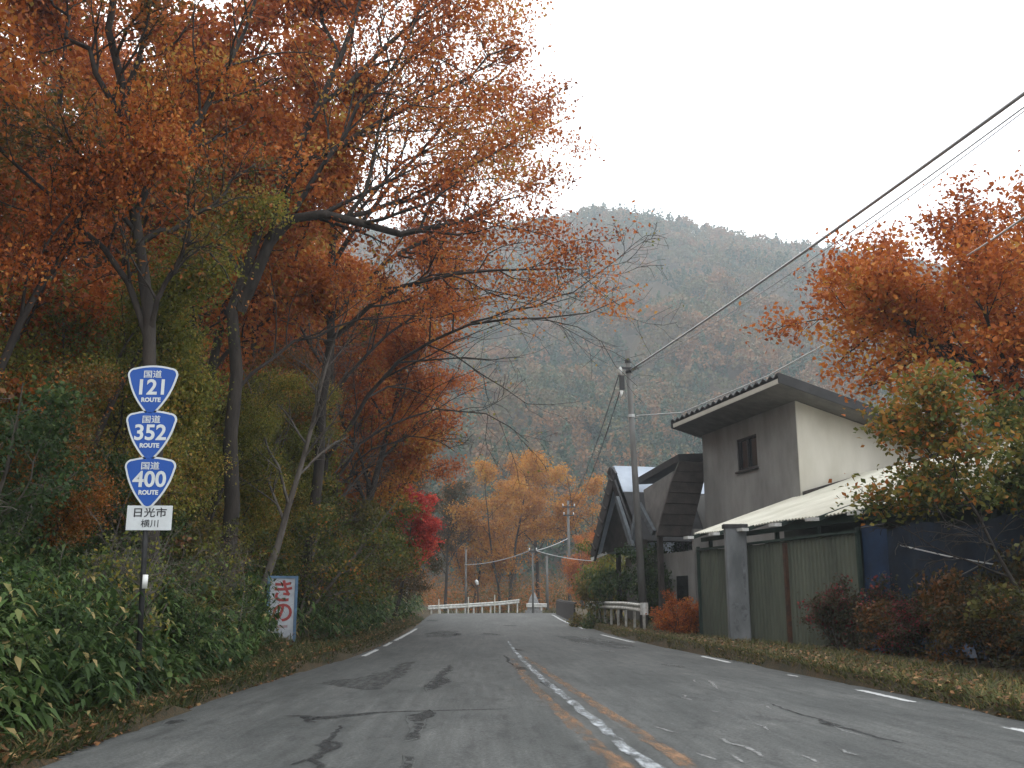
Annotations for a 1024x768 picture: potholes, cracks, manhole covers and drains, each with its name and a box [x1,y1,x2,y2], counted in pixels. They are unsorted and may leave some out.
crack [697,704,898,762]
crack [291,709,485,768]
